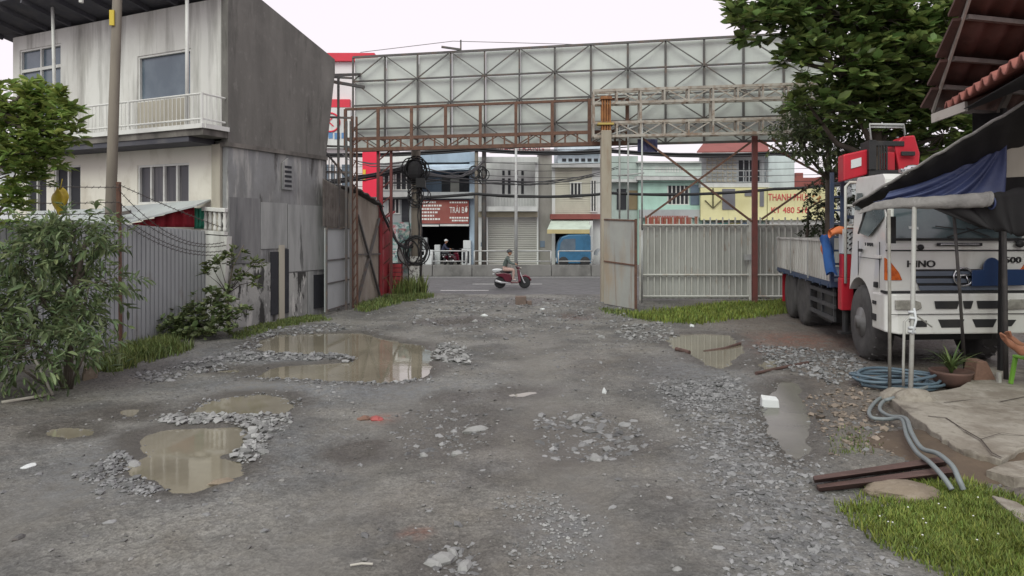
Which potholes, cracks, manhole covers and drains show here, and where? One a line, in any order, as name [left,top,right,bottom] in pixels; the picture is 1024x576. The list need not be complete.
pothole [657,330,757,369]
pothole [115,421,266,494]
pothole [236,330,442,384]
pothole [530,407,654,465]
pothole [752,377,828,469]
pothole [176,389,310,416]
pothole [32,420,114,441]
